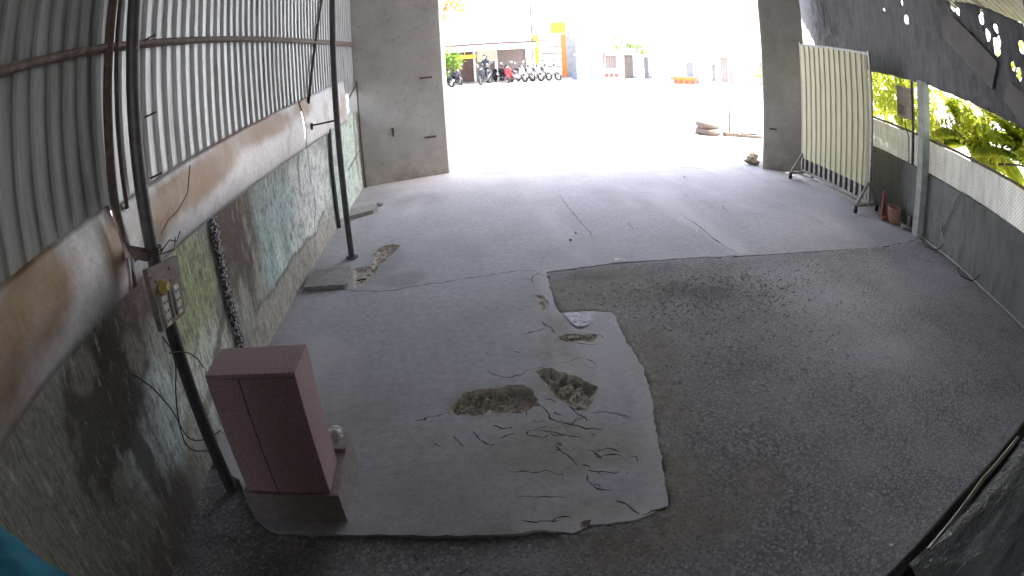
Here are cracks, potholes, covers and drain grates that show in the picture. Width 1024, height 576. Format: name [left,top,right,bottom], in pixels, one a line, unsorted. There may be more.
pothole [535,368,598,412]
crack [488,322,596,378]
pothole [448,384,541,416]
pothole [558,333,598,342]
pothole [534,294,549,312]
crack [435,399,668,515]
pothole [353,244,400,288]
